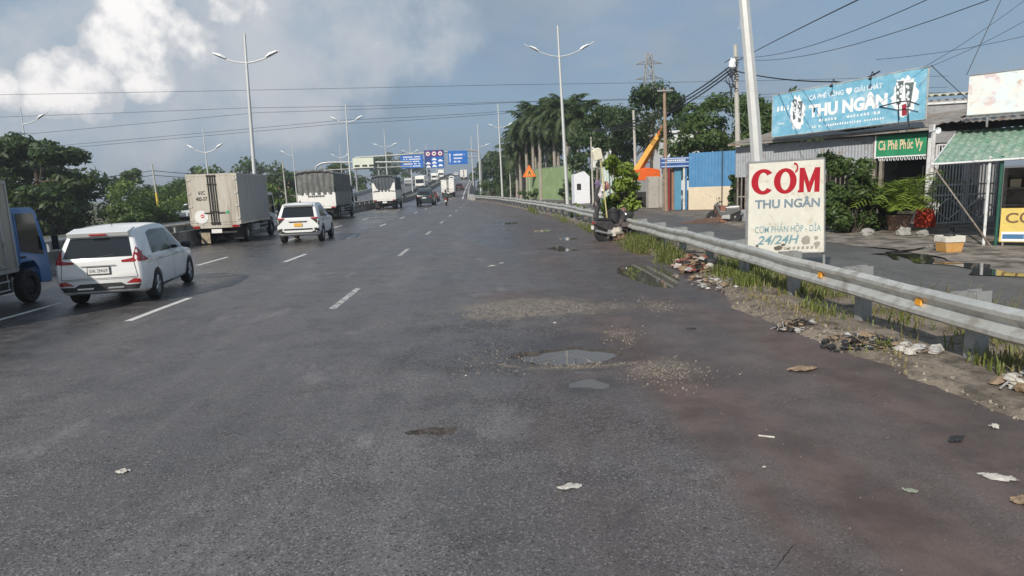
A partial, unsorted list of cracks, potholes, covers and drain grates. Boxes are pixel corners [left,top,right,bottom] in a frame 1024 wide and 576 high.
pothole [404,427,457,436]
pothole [509,347,624,366]
